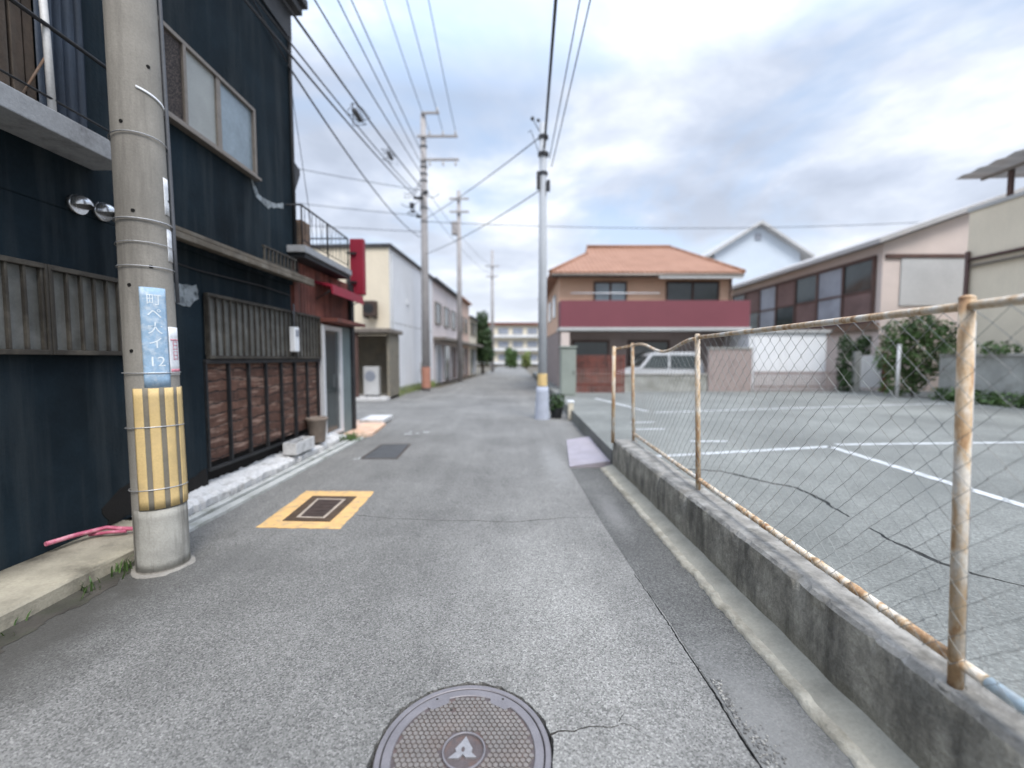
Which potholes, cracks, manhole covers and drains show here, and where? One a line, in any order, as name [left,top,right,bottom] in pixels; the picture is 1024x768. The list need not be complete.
manhole cover [370,685,554,768]
crack [549,714,652,740]
crack [677,469,1024,587]
